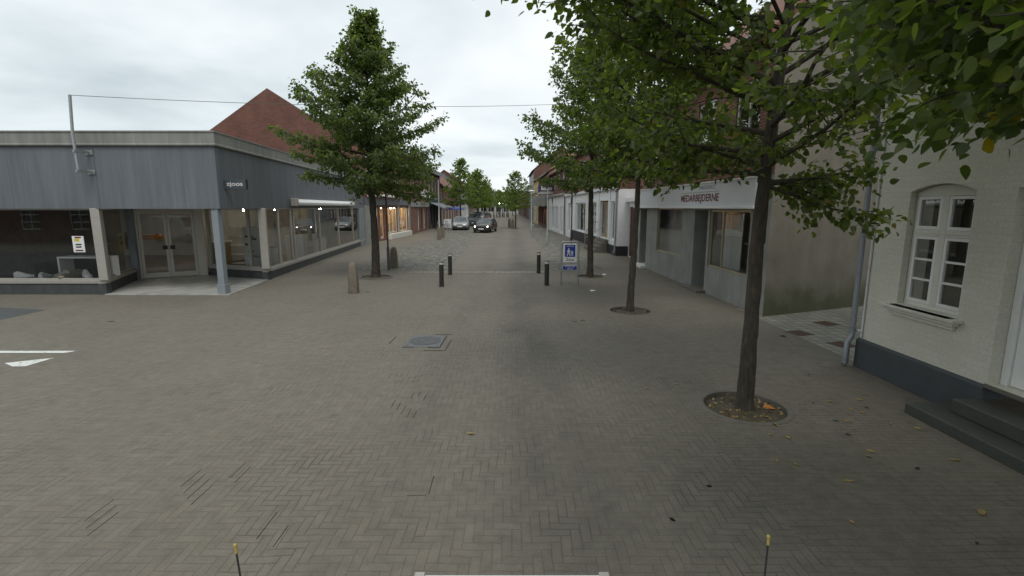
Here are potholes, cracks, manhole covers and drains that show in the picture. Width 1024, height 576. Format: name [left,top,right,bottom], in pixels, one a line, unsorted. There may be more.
manhole cover [389,334,453,351]
